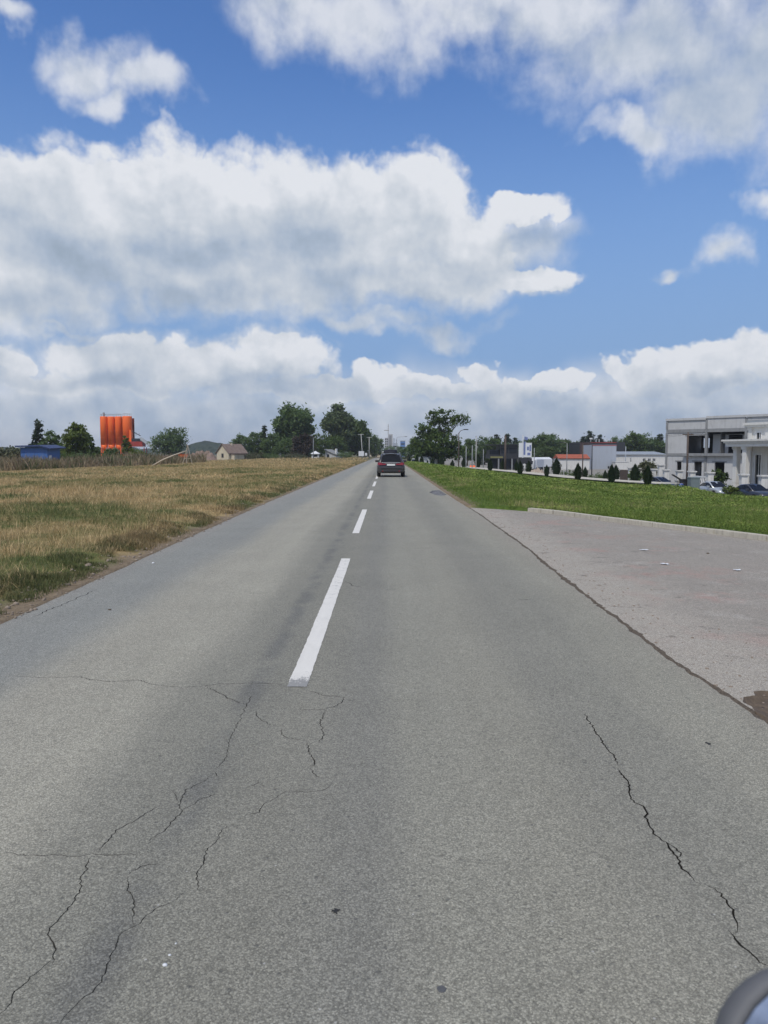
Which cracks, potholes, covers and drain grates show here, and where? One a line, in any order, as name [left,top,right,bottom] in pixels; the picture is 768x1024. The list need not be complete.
crack [0,676,354,1022]
crack [464,505,768,966]
